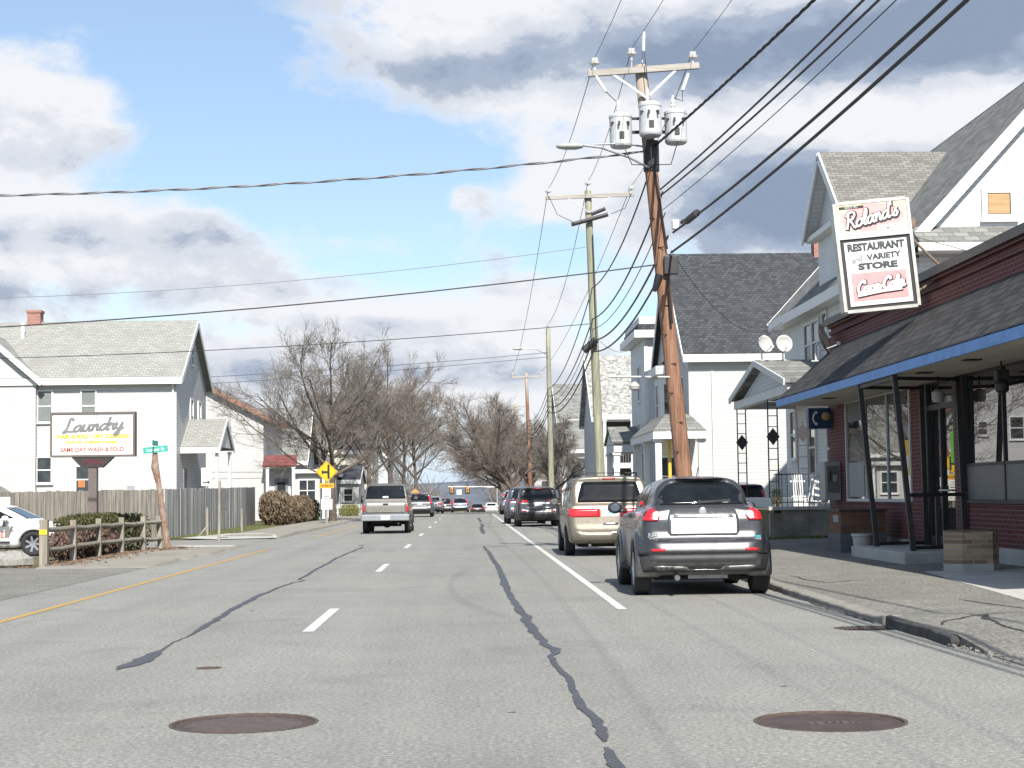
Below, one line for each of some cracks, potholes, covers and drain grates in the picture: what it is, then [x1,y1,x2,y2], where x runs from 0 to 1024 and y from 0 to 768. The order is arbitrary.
manhole cover [168,713,319,734]
crack [941,599,1024,631]
manhole cover [753,711,908,732]
